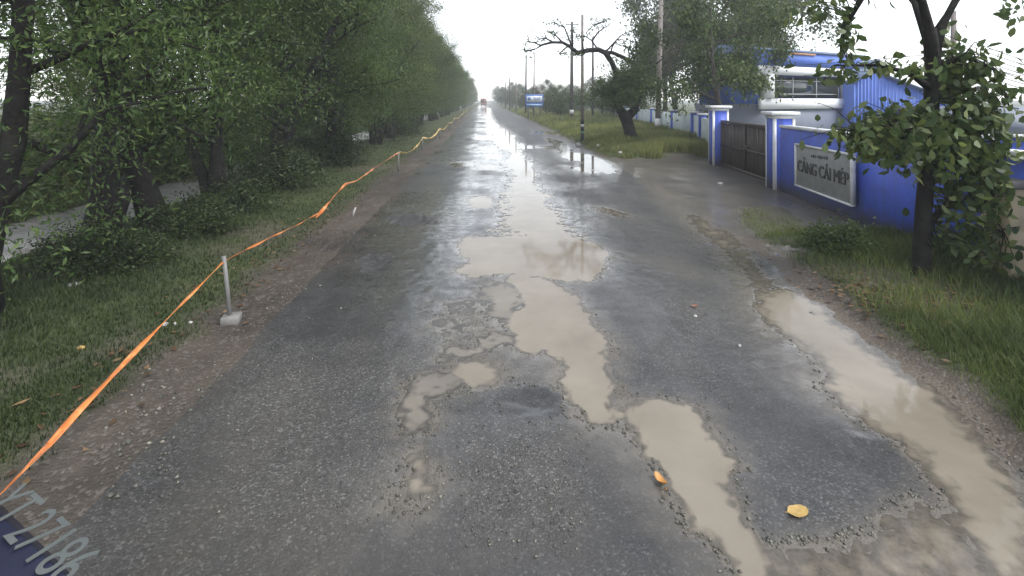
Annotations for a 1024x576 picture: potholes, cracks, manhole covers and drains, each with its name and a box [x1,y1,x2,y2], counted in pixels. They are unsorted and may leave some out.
pothole [391,446,443,509]
pothole [432,331,520,365]
pothole [473,280,527,324]
pothole [394,369,465,438]
pothole [498,276,629,431]
pothole [452,235,616,284]
pothole [446,357,508,390]
pothole [620,393,774,576]
